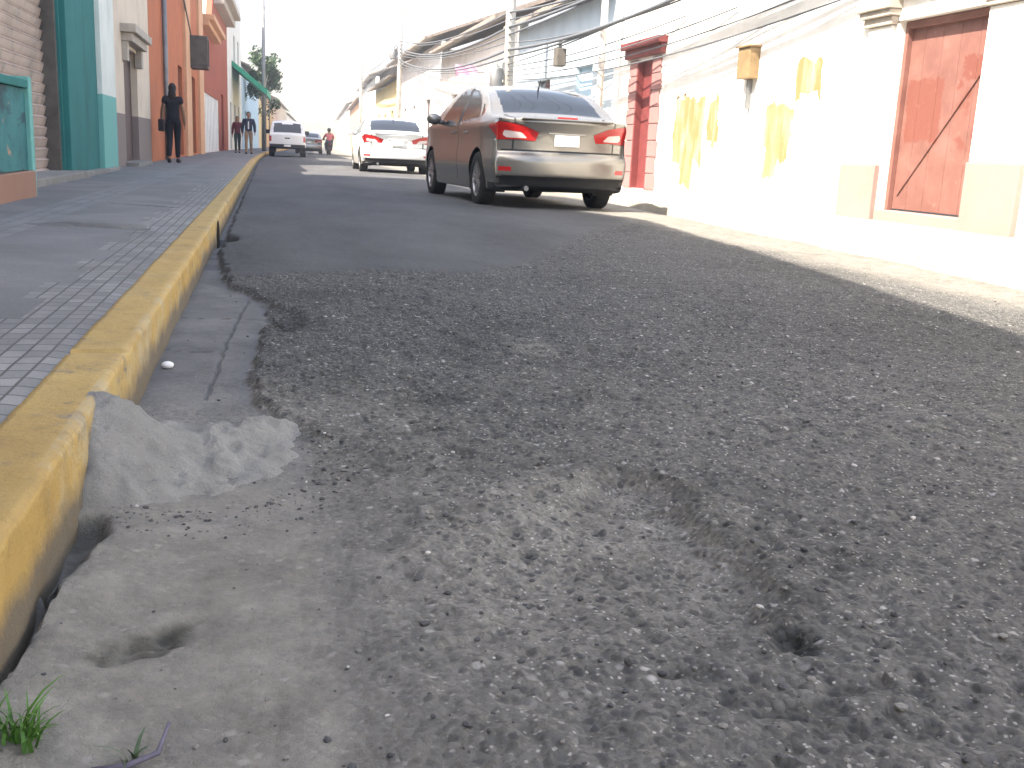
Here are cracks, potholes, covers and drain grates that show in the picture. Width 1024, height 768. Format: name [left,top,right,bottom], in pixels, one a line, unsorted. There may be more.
pothole [79,622,197,668]
pothole [760,619,828,658]
pothole [324,464,806,684]
pothole [38,514,115,613]
